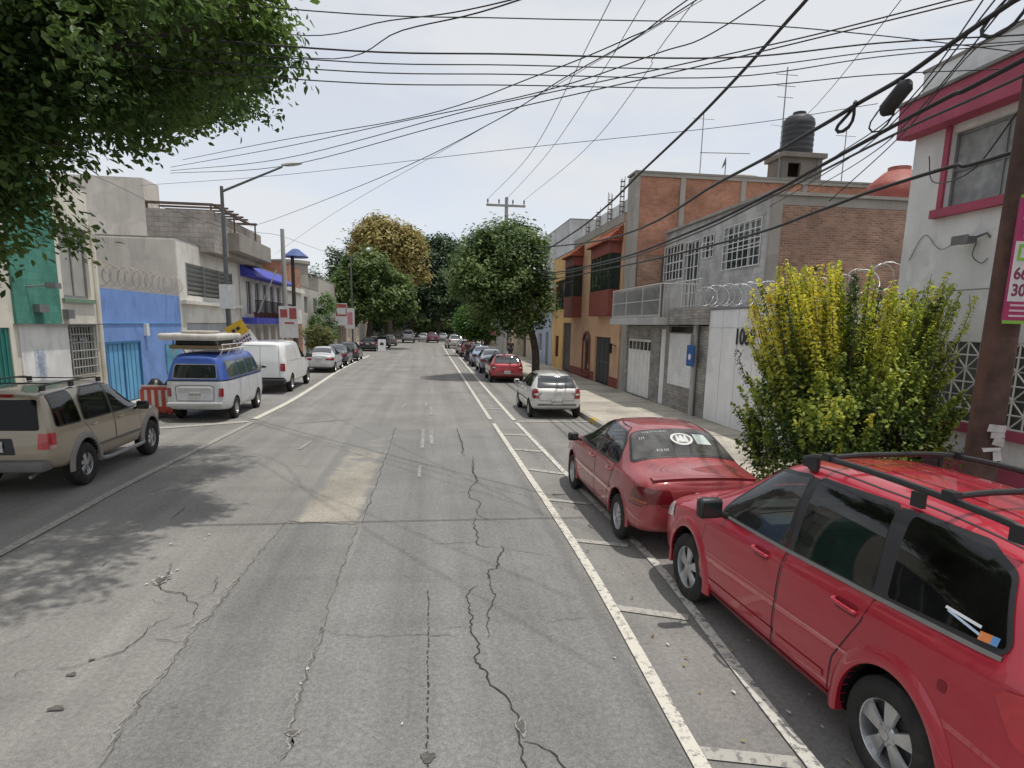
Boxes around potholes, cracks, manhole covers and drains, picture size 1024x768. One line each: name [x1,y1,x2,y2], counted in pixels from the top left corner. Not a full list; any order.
crack [67,563,218,668]
crack [409,430,566,768]
pothole [420,752,436,763]
